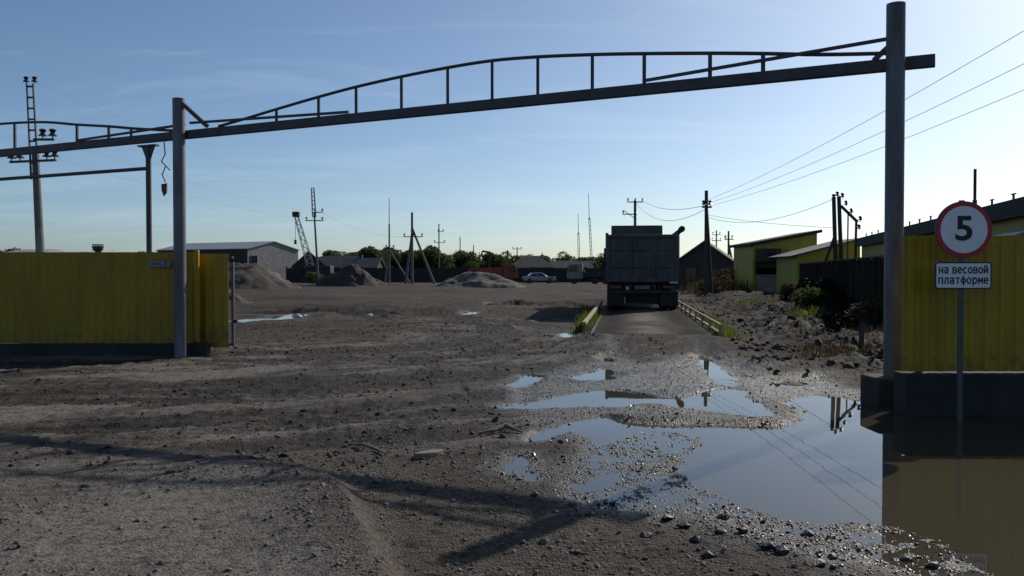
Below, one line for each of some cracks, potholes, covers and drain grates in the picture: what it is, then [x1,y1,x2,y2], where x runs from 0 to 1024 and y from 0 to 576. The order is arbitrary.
pothole [492,452,551,481]
pothole [523,393,1024,576]
pothole [536,366,622,392]
pothole [491,386,783,417]
pothole [229,313,313,323]
pothole [740,375,830,400]
